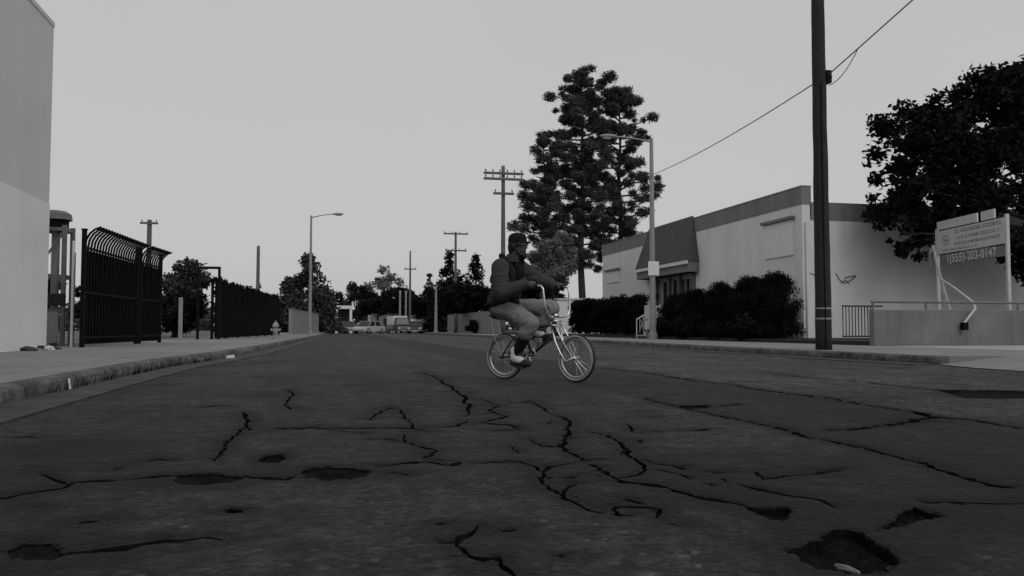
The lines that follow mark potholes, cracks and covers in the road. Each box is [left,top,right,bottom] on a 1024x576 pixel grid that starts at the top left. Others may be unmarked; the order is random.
pothole [749,507,792,521]
crack [0,406,296,500]
crack [441,526,516,576]
pothole [935,390,1024,399]
pothole [877,507,942,531]
pothole [258,455,286,463]
pothole [301,468,371,481]
crack [64,520,222,556]
pothole [7,544,64,561]
crack [273,372,1024,526]
pothole [786,529,900,575]
pothole [174,474,242,486]
